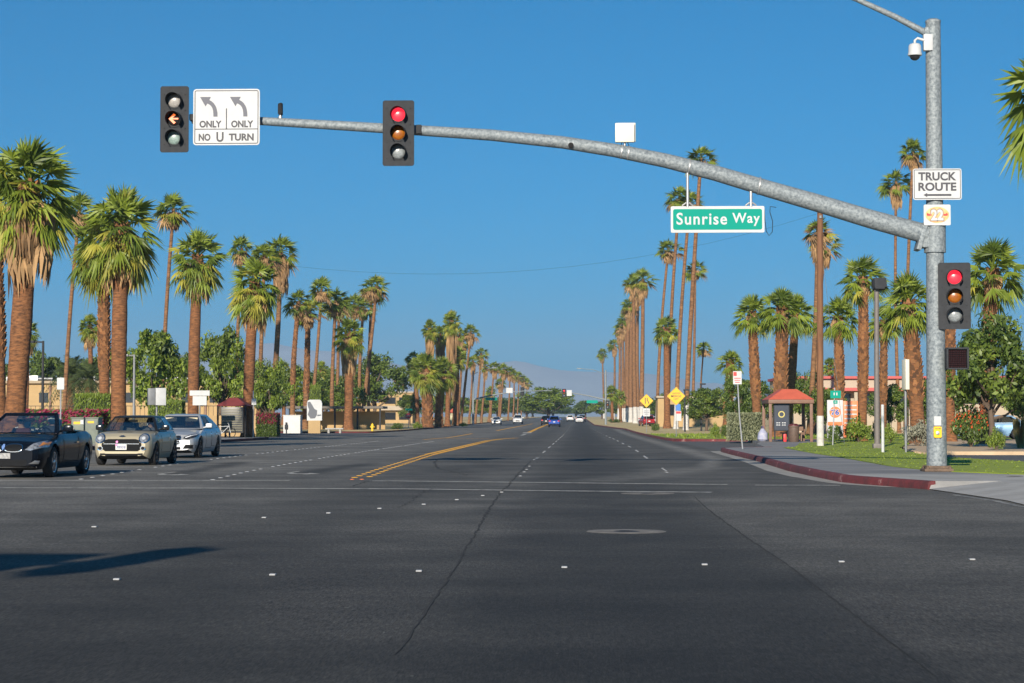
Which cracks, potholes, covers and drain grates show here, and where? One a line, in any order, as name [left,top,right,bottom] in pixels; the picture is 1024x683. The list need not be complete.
crack [394,461,531,655]
